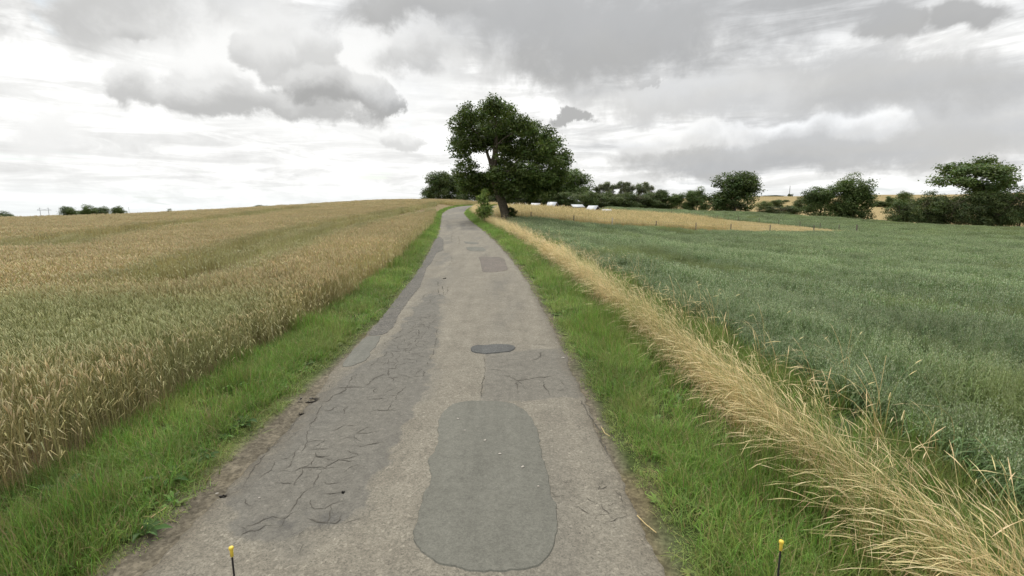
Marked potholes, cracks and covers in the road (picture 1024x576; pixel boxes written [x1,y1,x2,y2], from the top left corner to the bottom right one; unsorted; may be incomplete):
crack [239,236,460,553]
crack [503,353,568,395]
